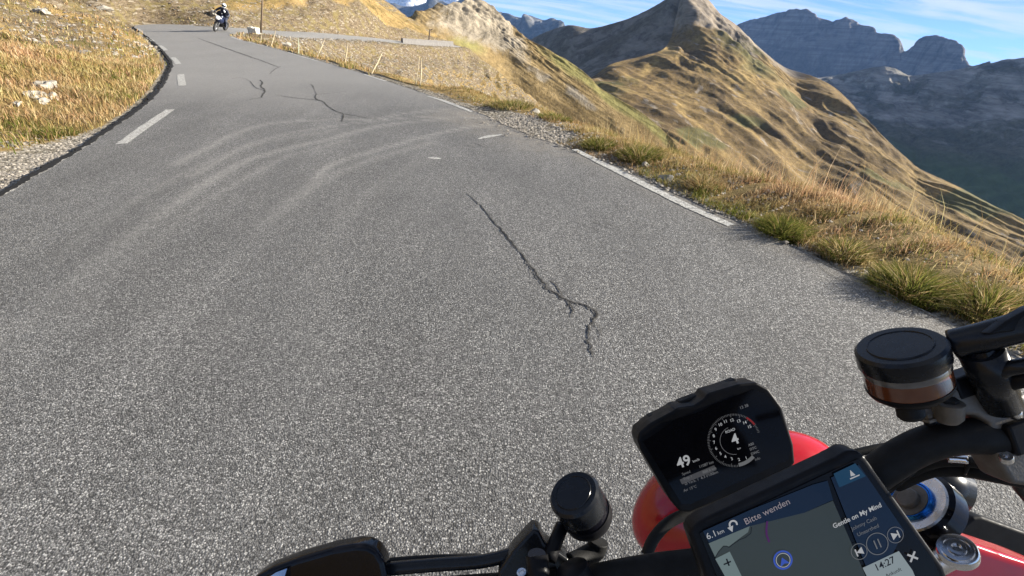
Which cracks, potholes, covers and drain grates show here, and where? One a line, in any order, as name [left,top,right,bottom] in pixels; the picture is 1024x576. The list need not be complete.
crack [232,78,368,121]
crack [468,193,628,357]
